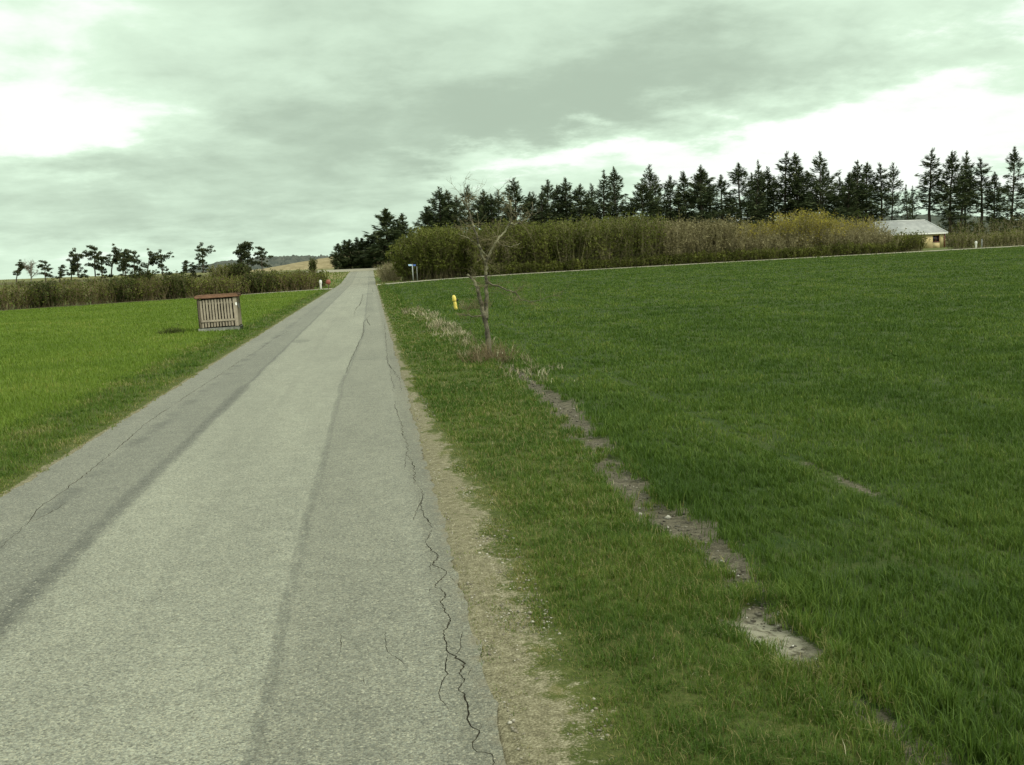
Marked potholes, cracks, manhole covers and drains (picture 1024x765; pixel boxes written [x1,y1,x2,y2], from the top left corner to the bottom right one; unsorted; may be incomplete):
crack [394,403,495,765]
crack [3,334,282,546]
